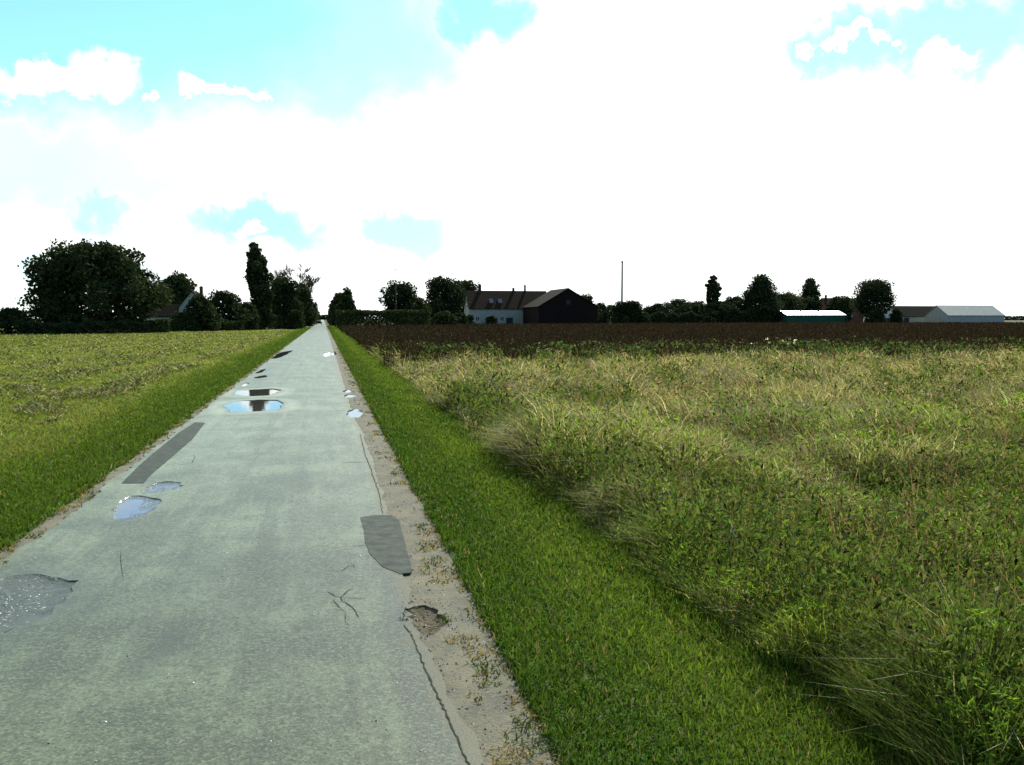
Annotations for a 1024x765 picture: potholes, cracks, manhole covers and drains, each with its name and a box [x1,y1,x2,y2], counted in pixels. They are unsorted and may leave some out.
crack [360,434,383,513]
pothole [111,496,162,520]
pothole [405,606,448,636]
crack [397,607,470,765]
crack [329,591,359,624]
pothole [141,482,184,493]
pothole [0,573,78,634]
